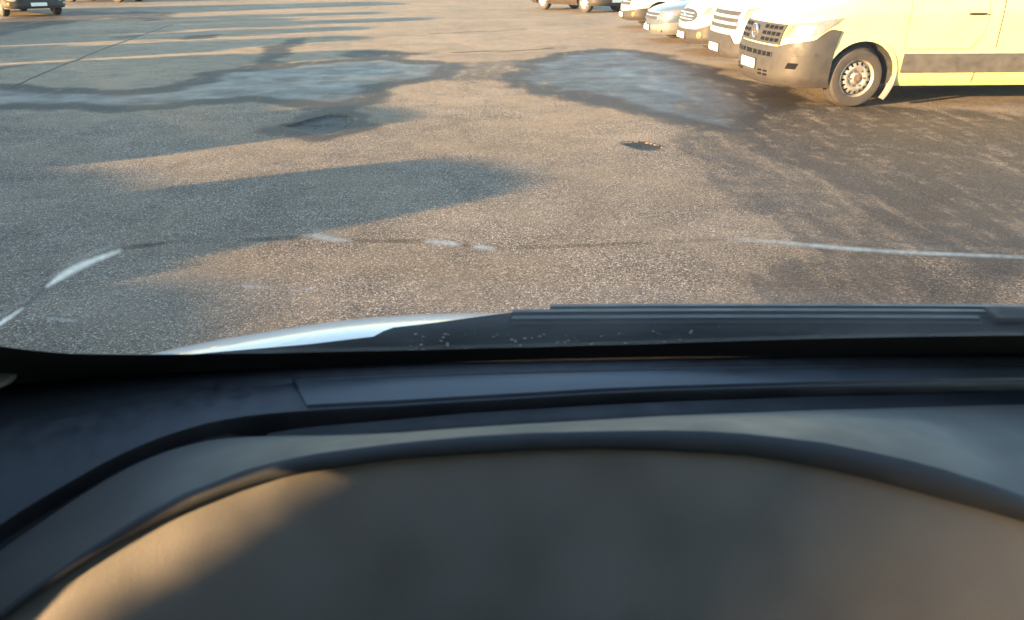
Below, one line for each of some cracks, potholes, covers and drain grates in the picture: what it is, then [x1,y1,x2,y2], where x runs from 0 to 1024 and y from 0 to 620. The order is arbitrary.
pothole [618,141,668,151]
pothole [277,113,354,136]
